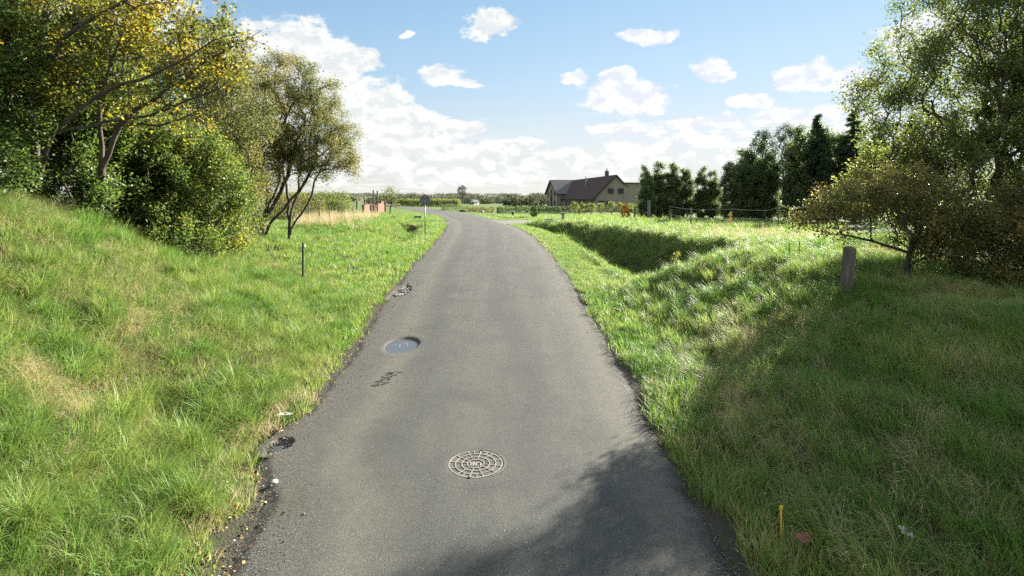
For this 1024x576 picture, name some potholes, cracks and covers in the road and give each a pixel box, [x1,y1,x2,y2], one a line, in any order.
pothole [384,283,417,301]
manhole cover [429,442,522,489]
pothole [256,433,302,458]
